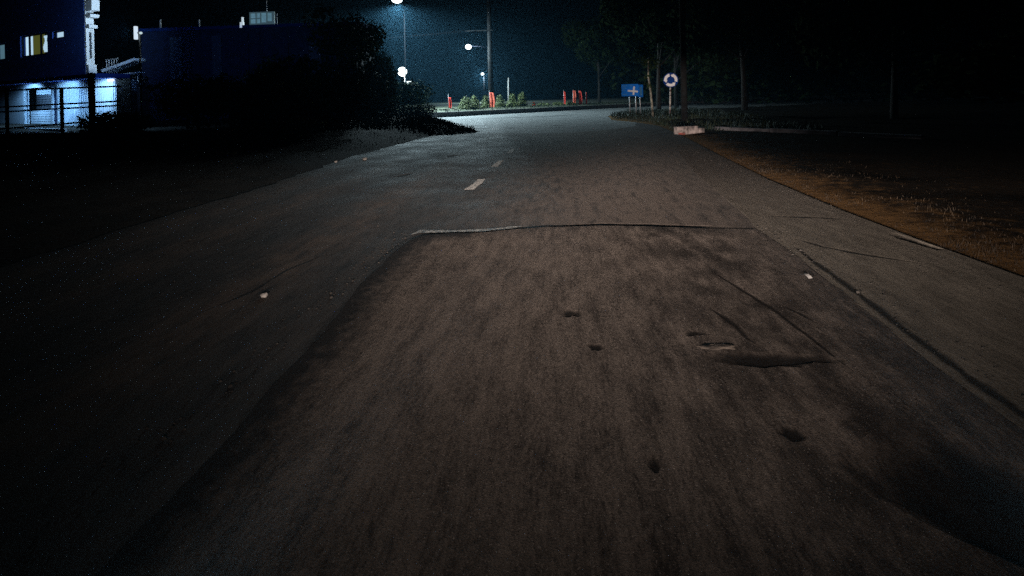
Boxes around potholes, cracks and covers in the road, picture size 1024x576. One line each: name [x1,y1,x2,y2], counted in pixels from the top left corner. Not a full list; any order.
pothole [646,452,661,474]
crack [702,238,924,379]
pothole [699,350,847,368]
pothole [776,424,810,442]
pothole [562,308,582,317]
pothole [586,343,605,351]
crack [192,252,331,317]
